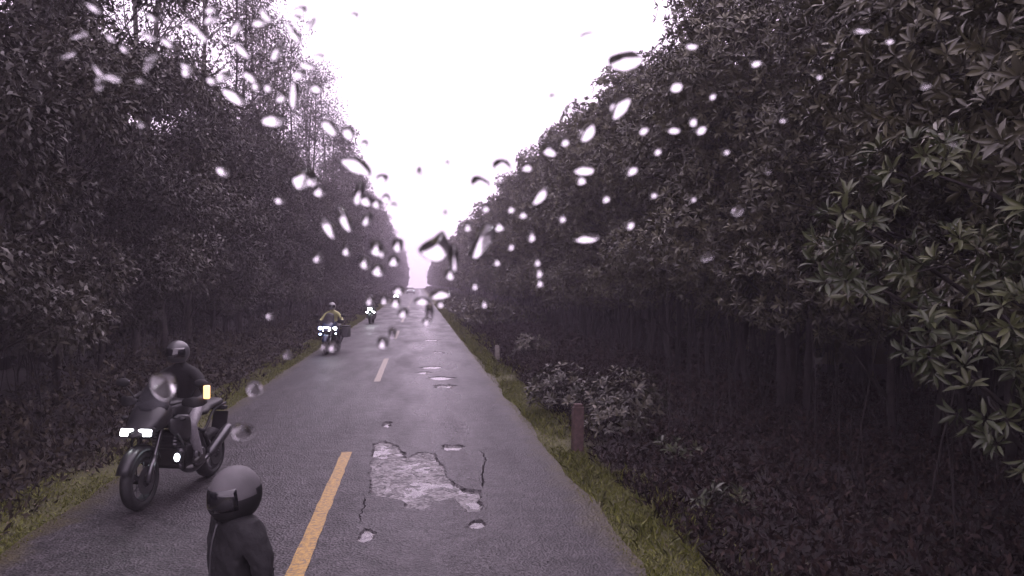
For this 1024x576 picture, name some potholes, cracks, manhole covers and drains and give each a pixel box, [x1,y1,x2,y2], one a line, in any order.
crack [479,450,487,487]
pothole [465,519,487,529]
pothole [367,440,484,512]
pothole [356,527,377,543]
